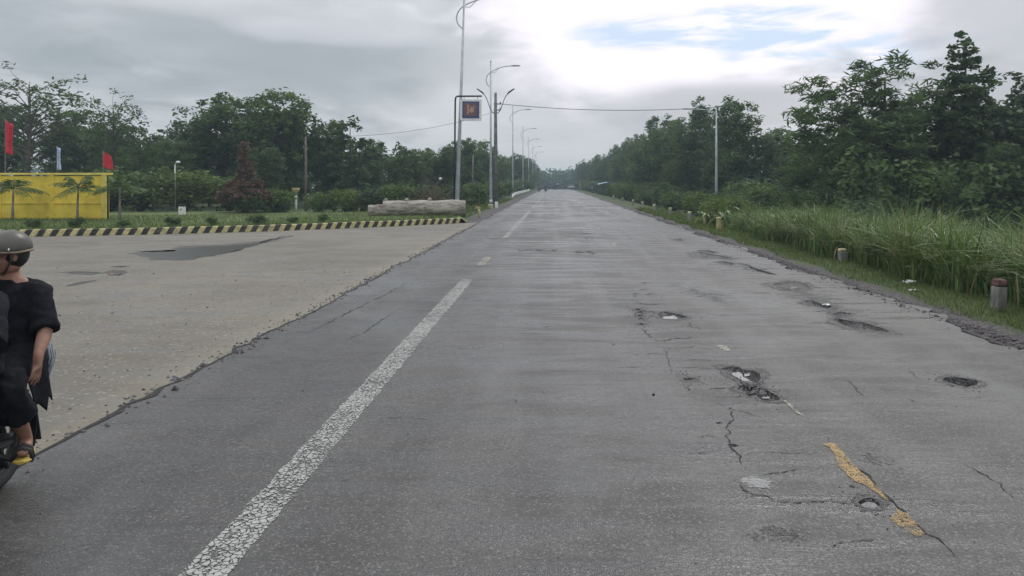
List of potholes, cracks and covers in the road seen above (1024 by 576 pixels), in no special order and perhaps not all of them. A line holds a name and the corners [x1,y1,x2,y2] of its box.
pothole [850,494,890,511]
pothole [713,365,771,386]
crack [688,387,956,560]
pothole [729,380,767,396]
pothole [934,375,988,388]
pothole [763,280,816,291]
pothole [798,300,835,310]
pothole [748,386,786,404]
pothole [648,311,694,321]
crack [634,282,720,393]
crack [303,285,403,340]
pothole [827,317,903,335]
